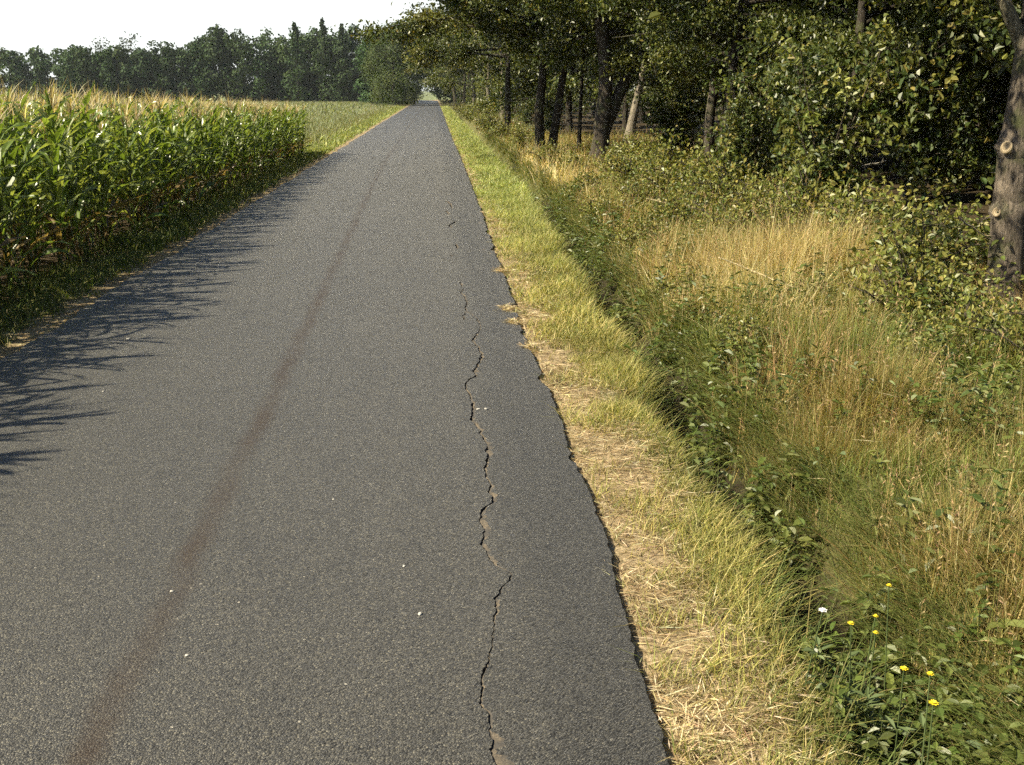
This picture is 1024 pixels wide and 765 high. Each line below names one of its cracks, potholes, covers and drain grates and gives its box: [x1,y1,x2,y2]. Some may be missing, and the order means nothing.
crack [446,201,515,765]
